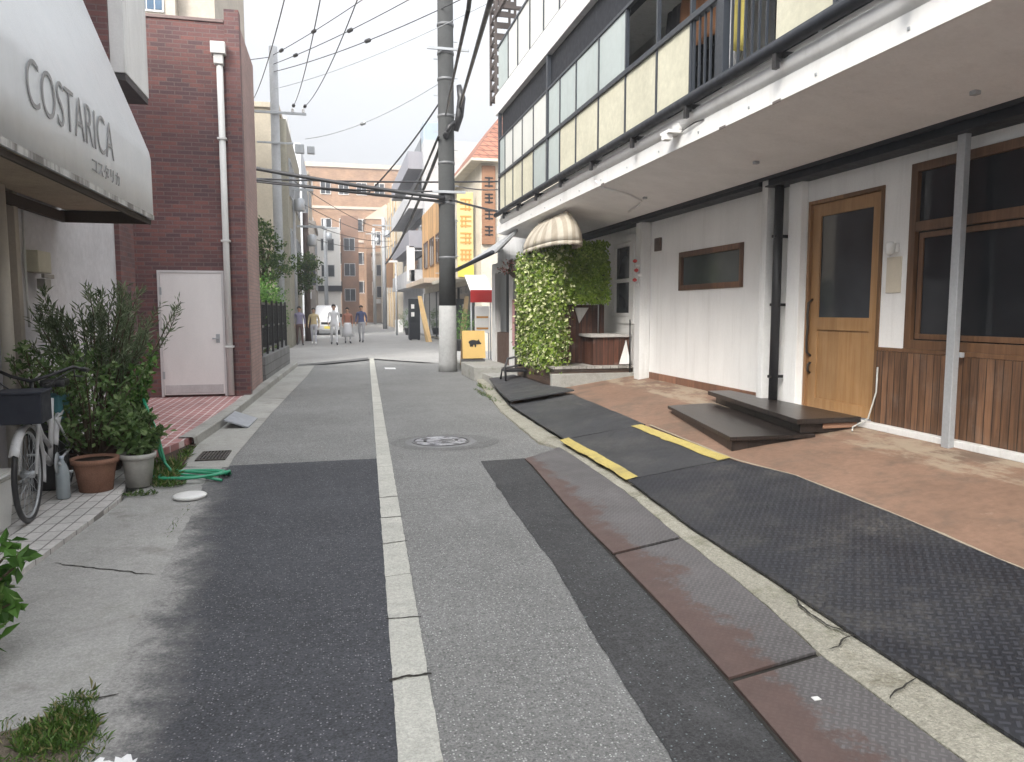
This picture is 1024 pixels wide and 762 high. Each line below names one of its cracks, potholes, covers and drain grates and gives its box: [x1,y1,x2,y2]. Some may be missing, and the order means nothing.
manhole cover [405,435,477,448]
crack [59,563,149,574]
drain grate [195,450,232,461]
crack [794,596,858,637]
